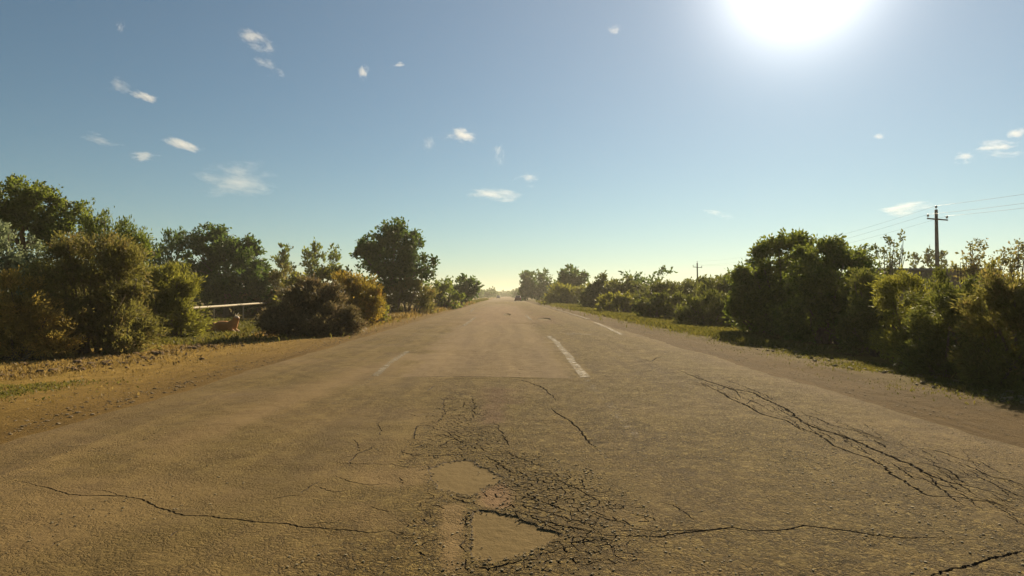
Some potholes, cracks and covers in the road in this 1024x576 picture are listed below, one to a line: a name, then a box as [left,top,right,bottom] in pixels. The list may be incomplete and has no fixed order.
crack [511,369,596,447]
crack [411,385,512,447]
crack [7,399,1024,576]
pothole [427,459,503,496]
pothole [468,510,563,563]
crack [682,371,1024,526]
